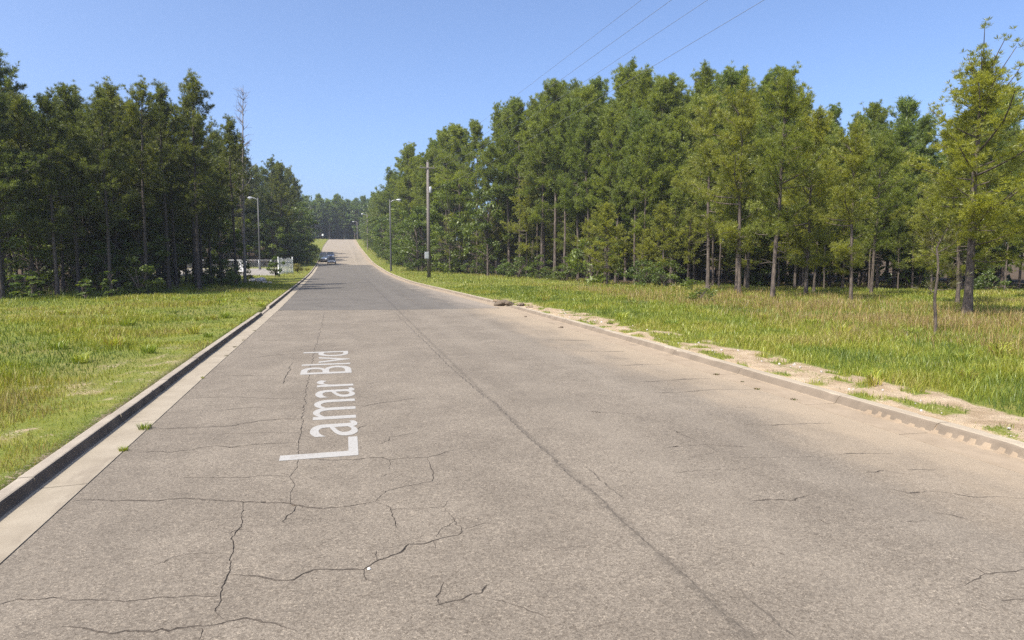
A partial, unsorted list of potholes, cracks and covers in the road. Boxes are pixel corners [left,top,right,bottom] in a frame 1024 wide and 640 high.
crack [62,315,496,640]
crack [840,453,1024,499]
crack [753,493,815,501]
crack [962,567,1024,586]
